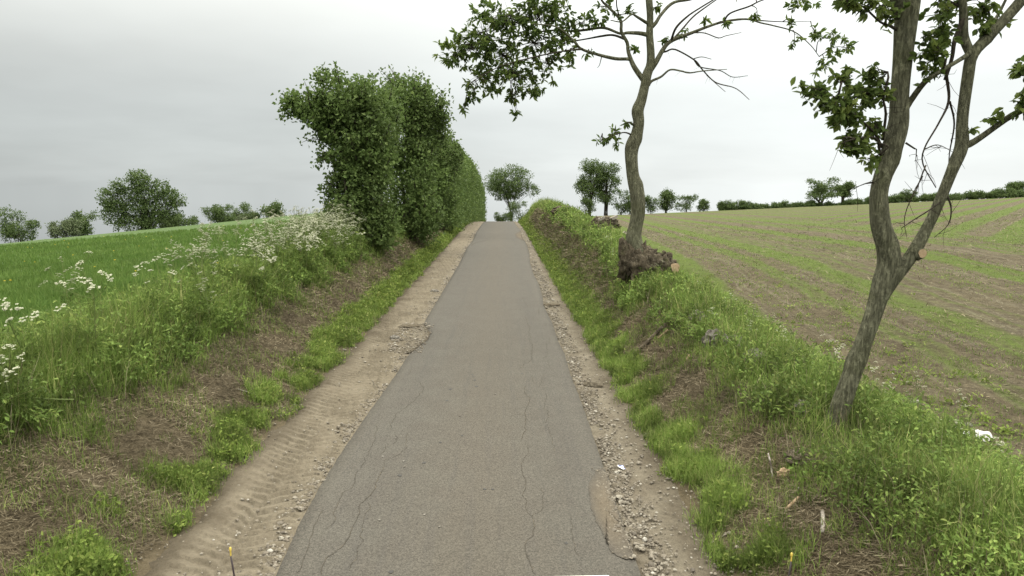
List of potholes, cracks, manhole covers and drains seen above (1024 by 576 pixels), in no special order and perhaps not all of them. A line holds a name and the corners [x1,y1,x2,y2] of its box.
pothole [401,324,430,353]
crack [300,371,424,574]
crack [510,296,555,573]
